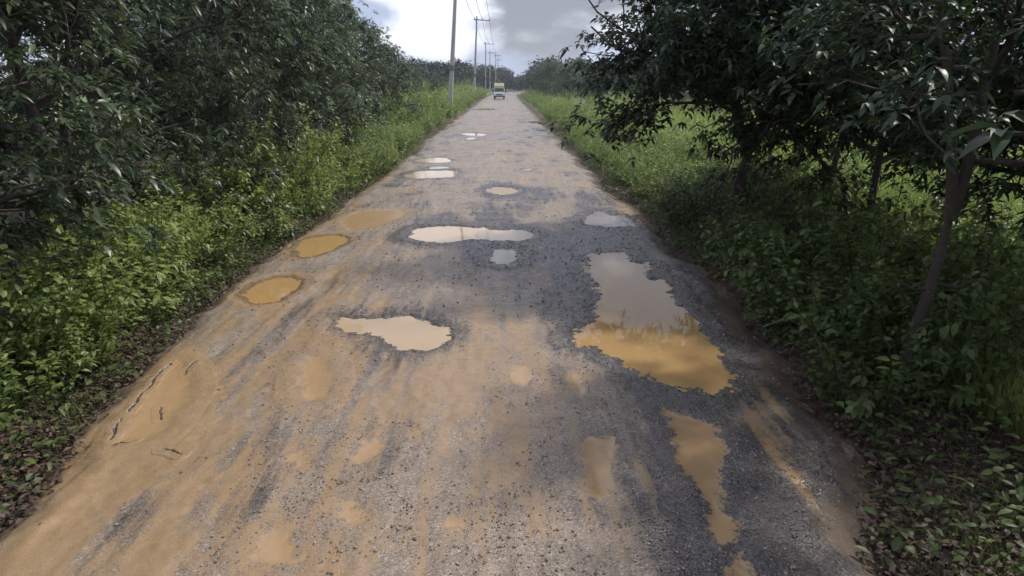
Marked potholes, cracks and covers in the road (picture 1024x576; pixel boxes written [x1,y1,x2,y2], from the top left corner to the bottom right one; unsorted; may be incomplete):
pothole [329,207,421,233]
pothole [565,208,650,231]
pothole [280,231,362,260]
pothole [548,247,763,409]
pothole [636,396,782,559]
pothole [302,305,484,363]
pothole [468,183,536,198]
